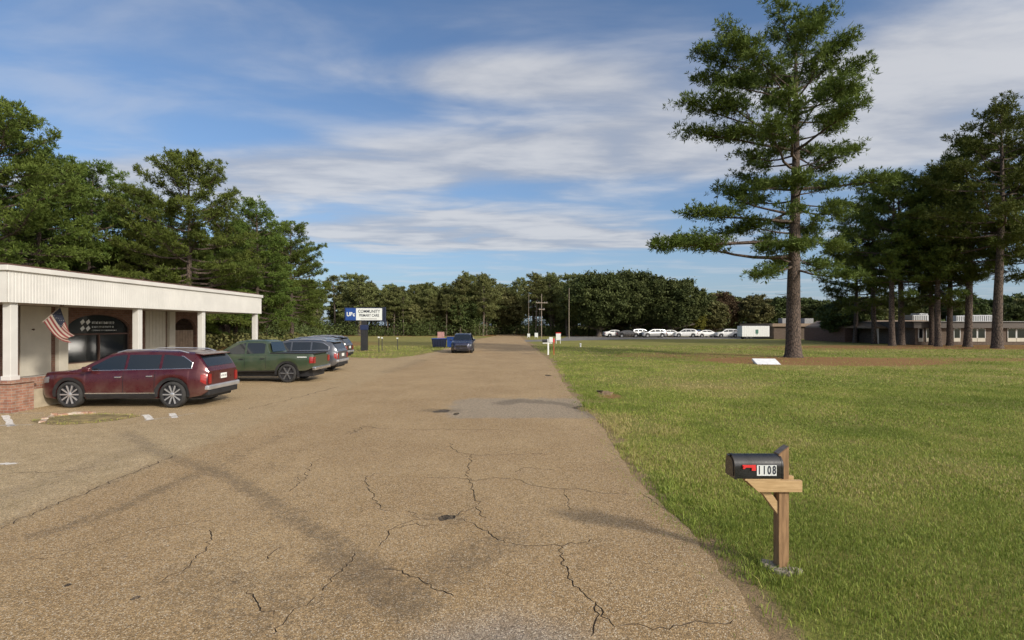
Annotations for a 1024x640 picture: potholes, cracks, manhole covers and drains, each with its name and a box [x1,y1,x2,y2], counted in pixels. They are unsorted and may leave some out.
crack [364,444,733,636]
crack [3,520,214,584]
crack [245,553,453,636]
